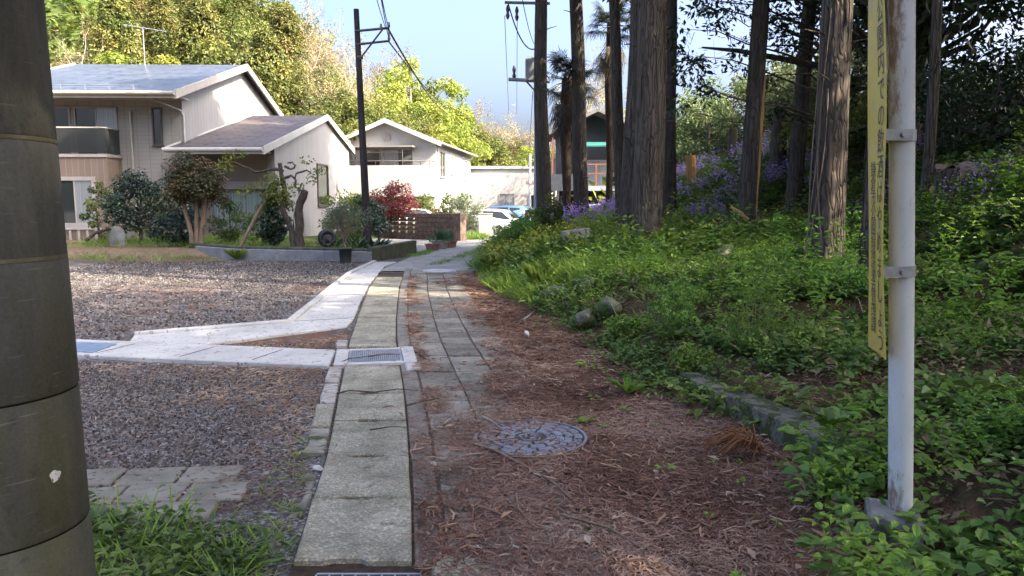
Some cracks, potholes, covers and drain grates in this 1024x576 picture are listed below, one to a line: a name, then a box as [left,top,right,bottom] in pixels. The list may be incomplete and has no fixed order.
drain grate [333,346,421,371]
manhole cover [474,420,588,459]
